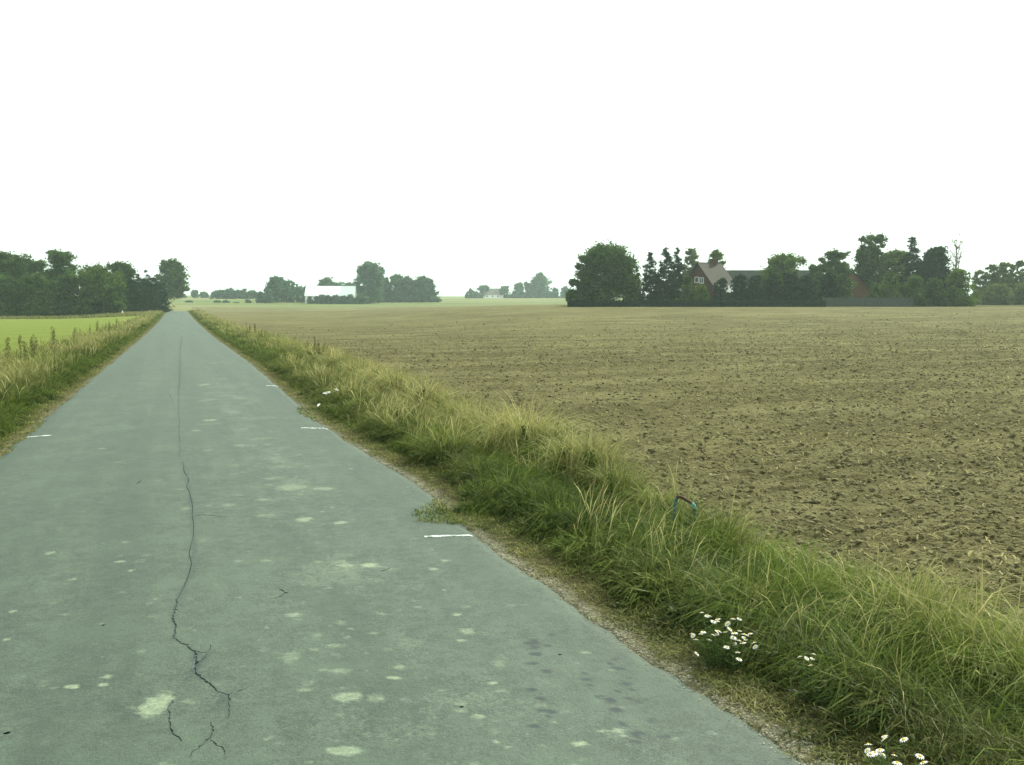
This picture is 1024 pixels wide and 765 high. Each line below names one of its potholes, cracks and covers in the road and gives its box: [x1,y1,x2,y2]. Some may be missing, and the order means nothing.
crack [167,464,246,758]
